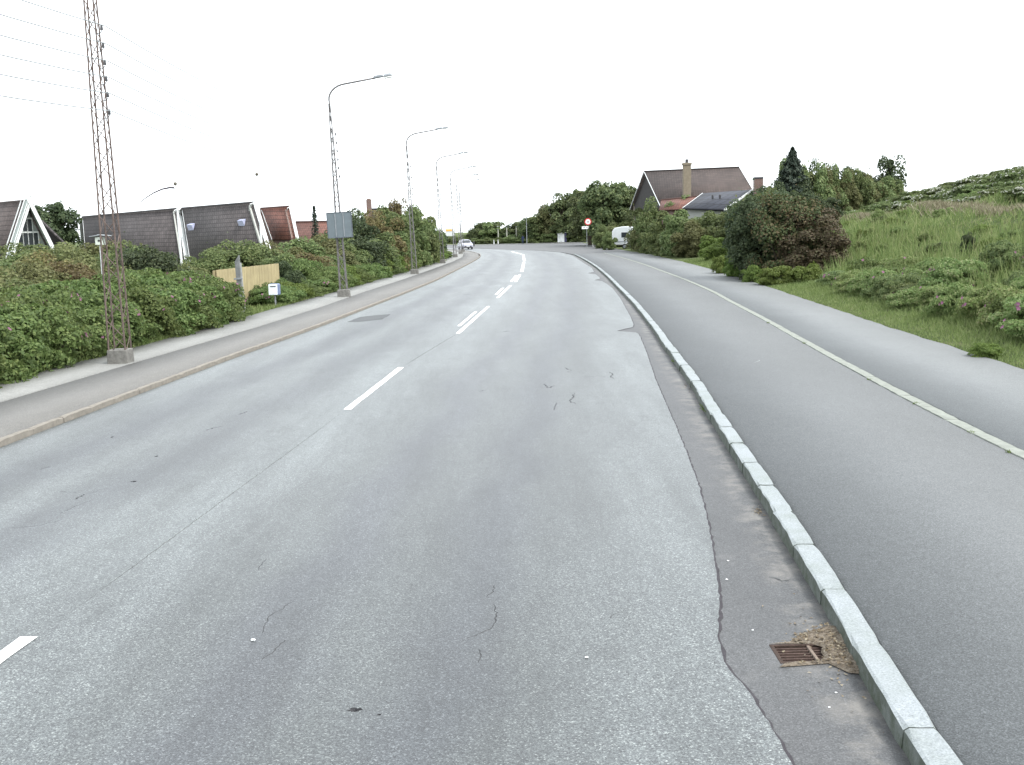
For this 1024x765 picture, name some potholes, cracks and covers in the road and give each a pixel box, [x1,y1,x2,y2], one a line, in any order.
crack [261,603,289,661]
crack [468,585,498,663]
drain grate [769,644,824,664]
